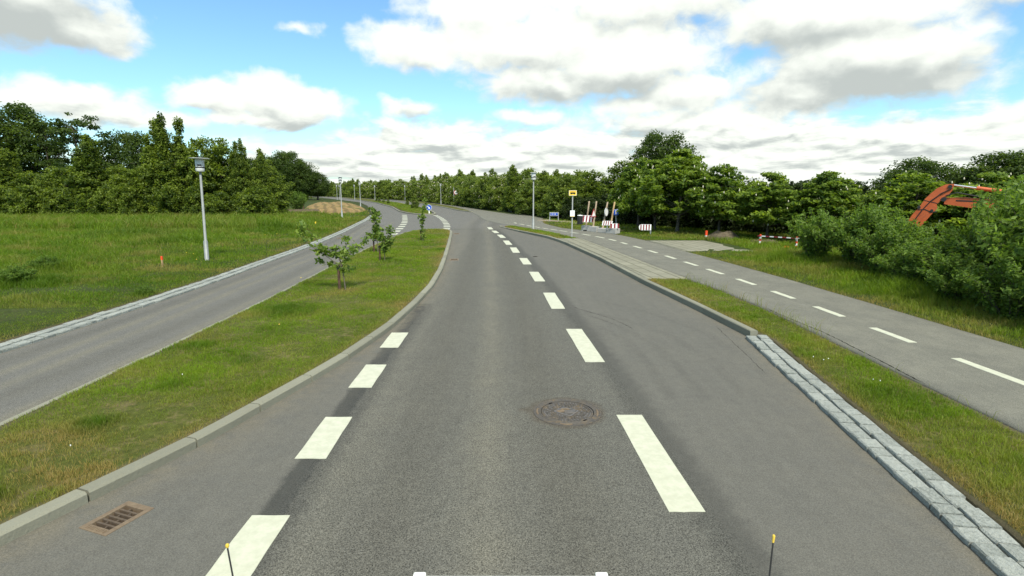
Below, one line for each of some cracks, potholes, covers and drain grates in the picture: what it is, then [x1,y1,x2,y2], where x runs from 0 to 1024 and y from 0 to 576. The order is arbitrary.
manhole cover [534,399,601,426]
drain grate [79,501,154,536]
